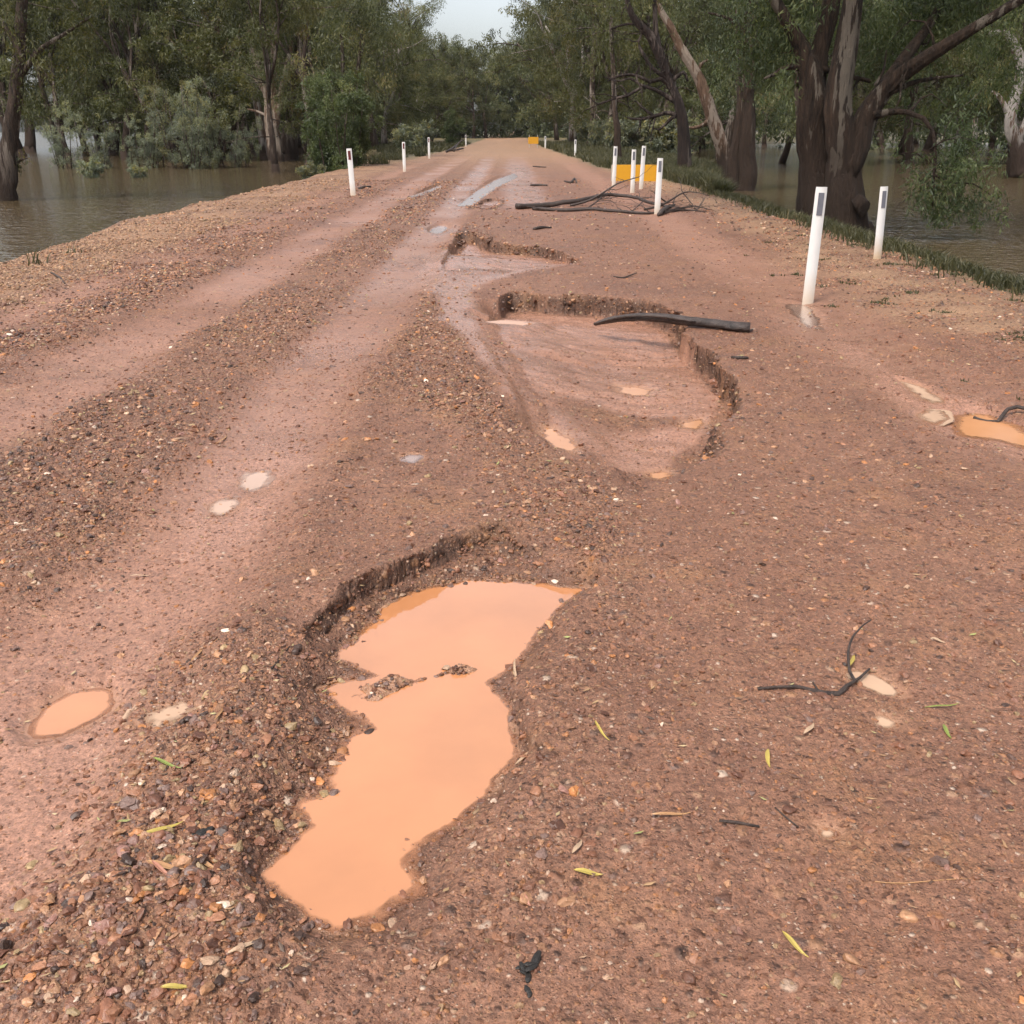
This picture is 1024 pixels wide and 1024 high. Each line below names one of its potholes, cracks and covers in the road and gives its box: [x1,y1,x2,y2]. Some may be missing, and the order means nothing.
pothole [433,222,585,290]
pothole [225,519,609,973]
pothole [2,666,135,752]
pothole [473,290,745,501]
